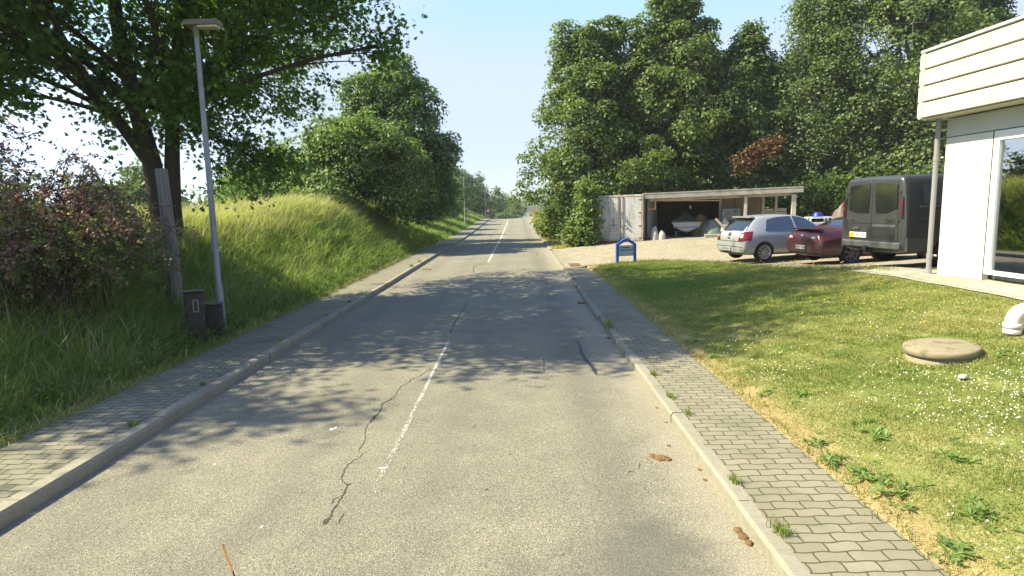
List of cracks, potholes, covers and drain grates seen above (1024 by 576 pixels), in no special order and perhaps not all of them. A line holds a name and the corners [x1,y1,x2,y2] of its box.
crack [322,368,431,524]
